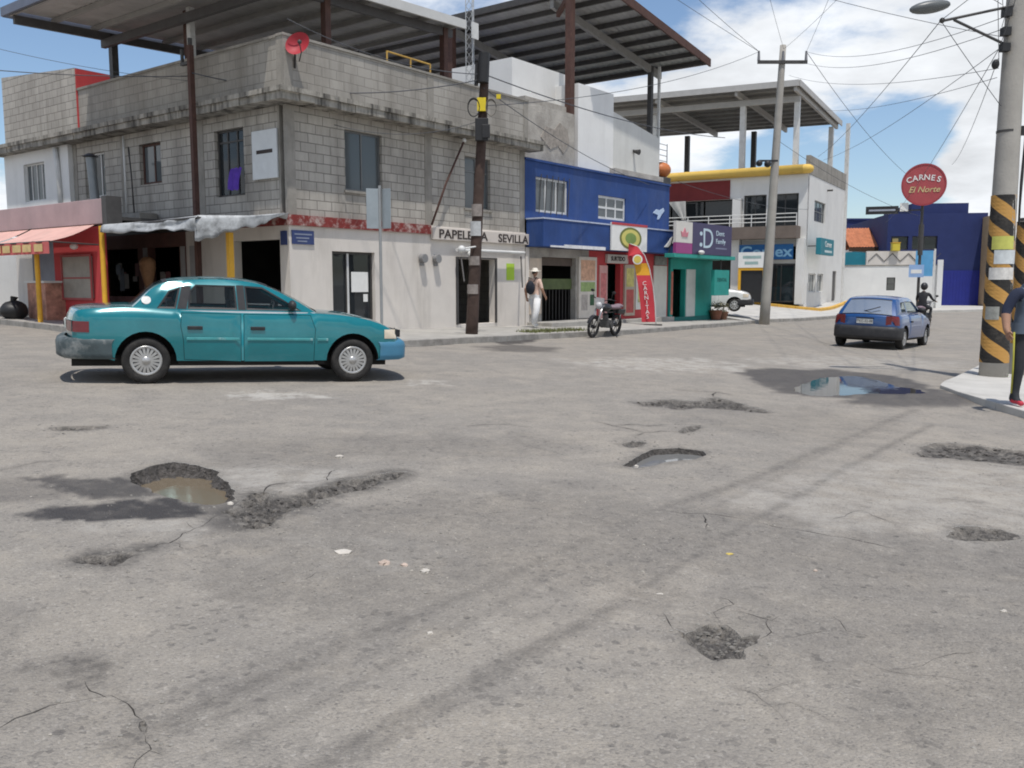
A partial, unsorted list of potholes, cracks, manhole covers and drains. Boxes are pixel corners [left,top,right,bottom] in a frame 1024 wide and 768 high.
pothole [633,397,772,413]
pothole [898,442,1024,466]
crack [664,597,776,639]
pothole [938,518,1024,547]
pothole [617,444,720,468]
pothole [130,461,242,511]
crack [0,683,159,768]
pothole [608,437,659,449]
pothole [649,613,776,666]
pothole [198,469,419,533]
